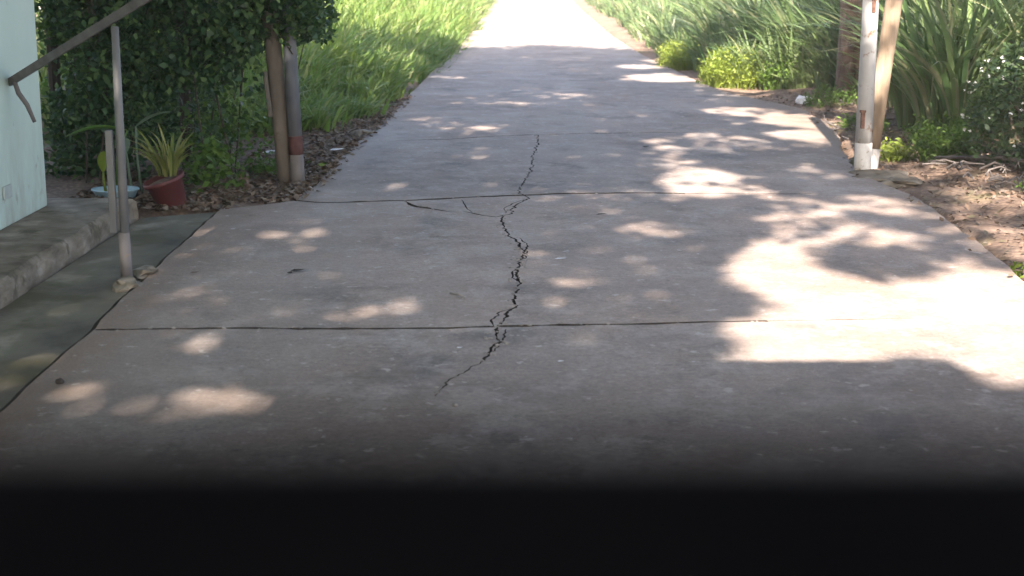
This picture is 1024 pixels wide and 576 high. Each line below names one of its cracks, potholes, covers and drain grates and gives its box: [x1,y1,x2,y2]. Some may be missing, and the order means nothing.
crack [95,132,907,396]
